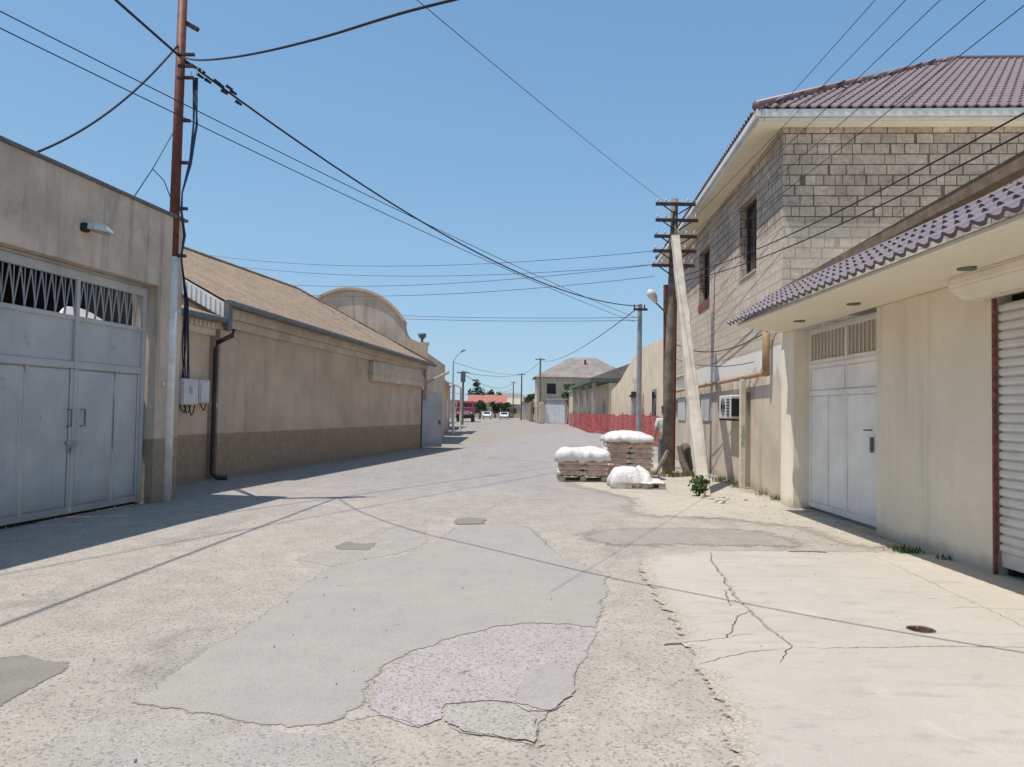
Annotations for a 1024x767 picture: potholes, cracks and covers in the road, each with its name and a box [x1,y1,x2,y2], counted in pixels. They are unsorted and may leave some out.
crack [664,551,1024,665]
